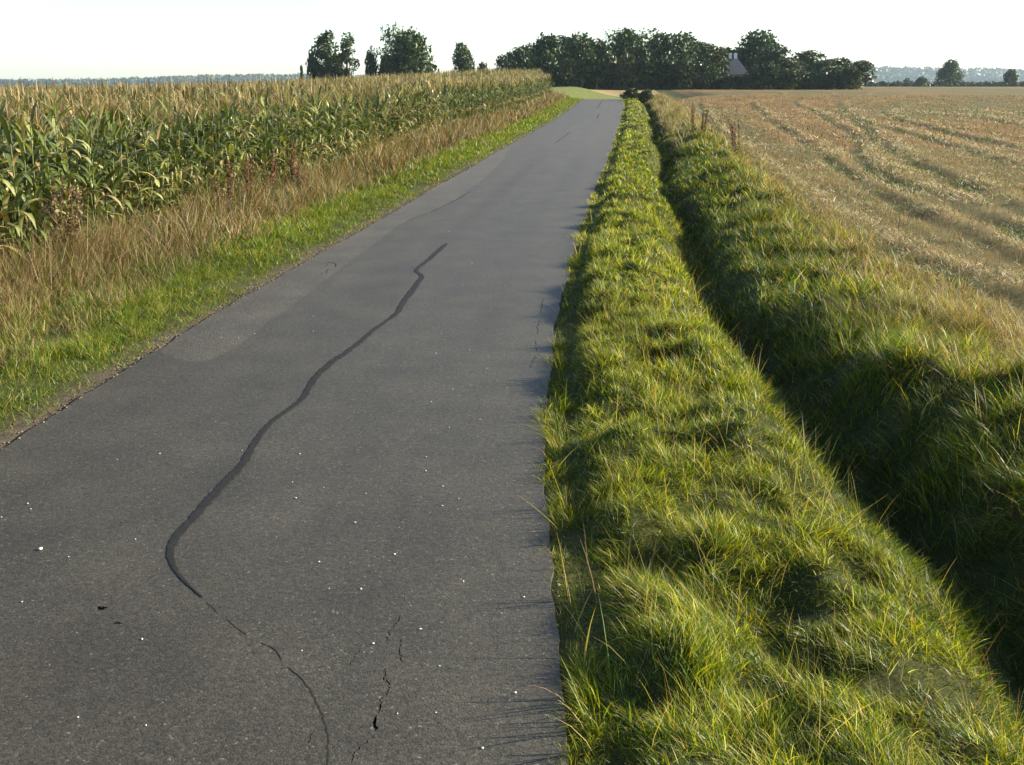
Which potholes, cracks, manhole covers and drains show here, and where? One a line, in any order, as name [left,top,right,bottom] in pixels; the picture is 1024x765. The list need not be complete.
crack [351,599,405,763]
